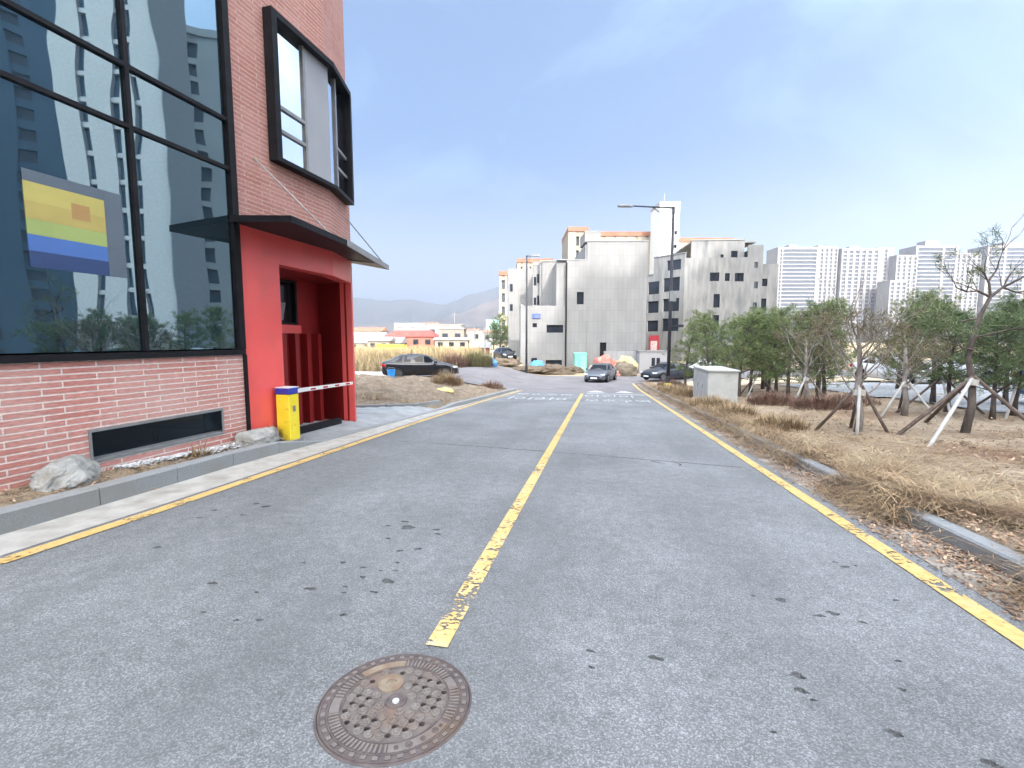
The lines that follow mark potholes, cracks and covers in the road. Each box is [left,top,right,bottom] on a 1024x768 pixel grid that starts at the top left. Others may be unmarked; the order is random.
manhole cover [313,654,472,768]
